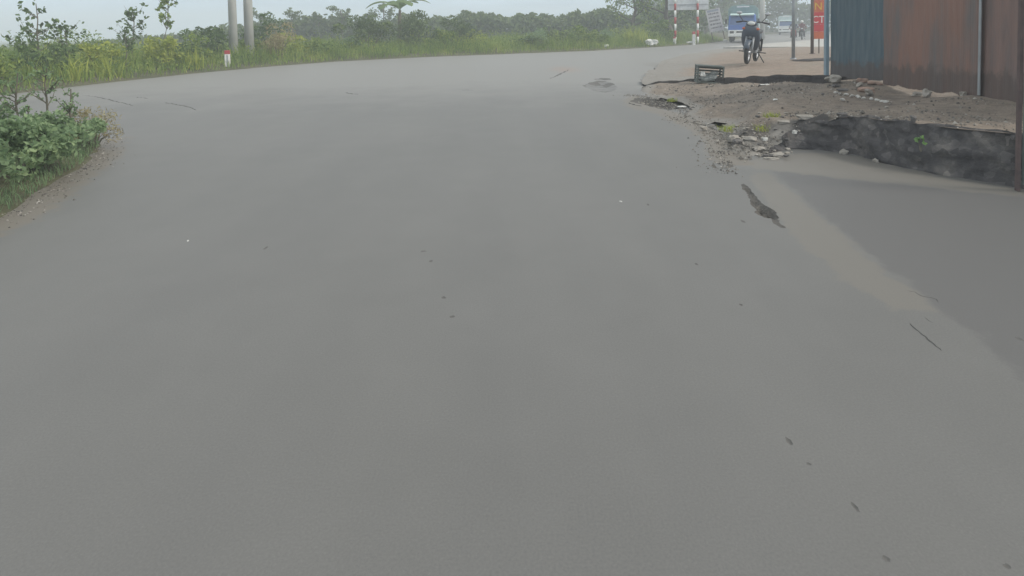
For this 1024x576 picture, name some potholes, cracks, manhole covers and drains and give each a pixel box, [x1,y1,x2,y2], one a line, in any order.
pothole [583,81,618,92]
crack [910,319,942,351]
pothole [630,97,686,110]
